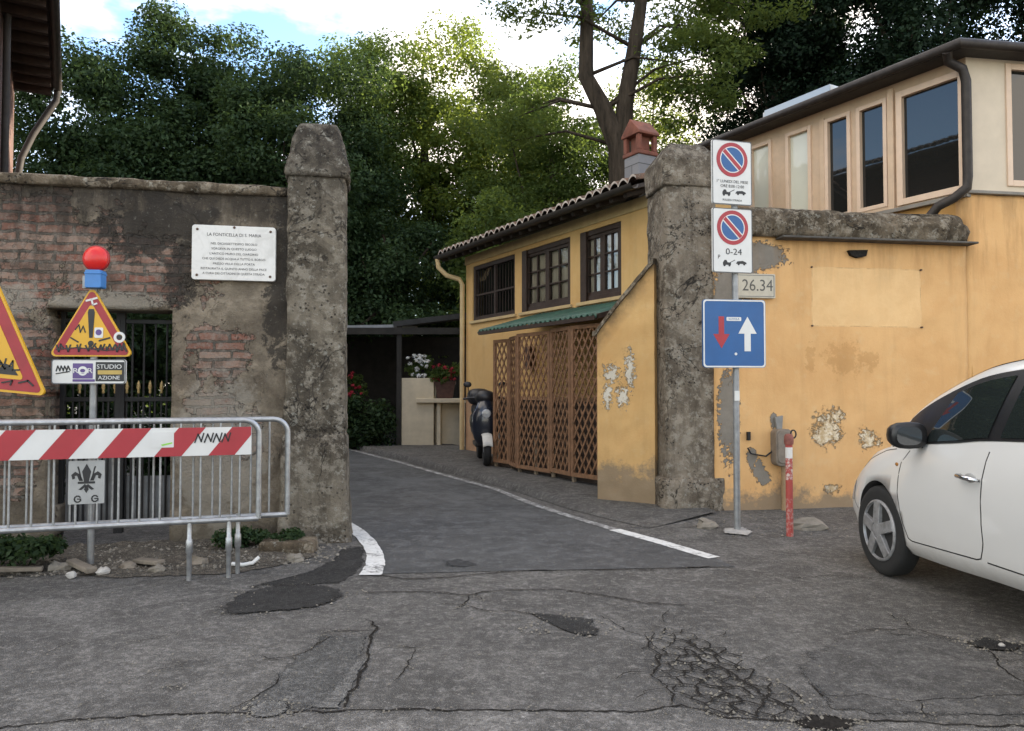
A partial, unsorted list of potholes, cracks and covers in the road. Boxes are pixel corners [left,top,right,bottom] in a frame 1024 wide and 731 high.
crack [227,619,421,718]
pothole [967,638,1021,650]
crack [602,607,1024,721]
pothole [528,612,598,635]
pothole [794,714,855,730]
crack [365,566,873,615]
